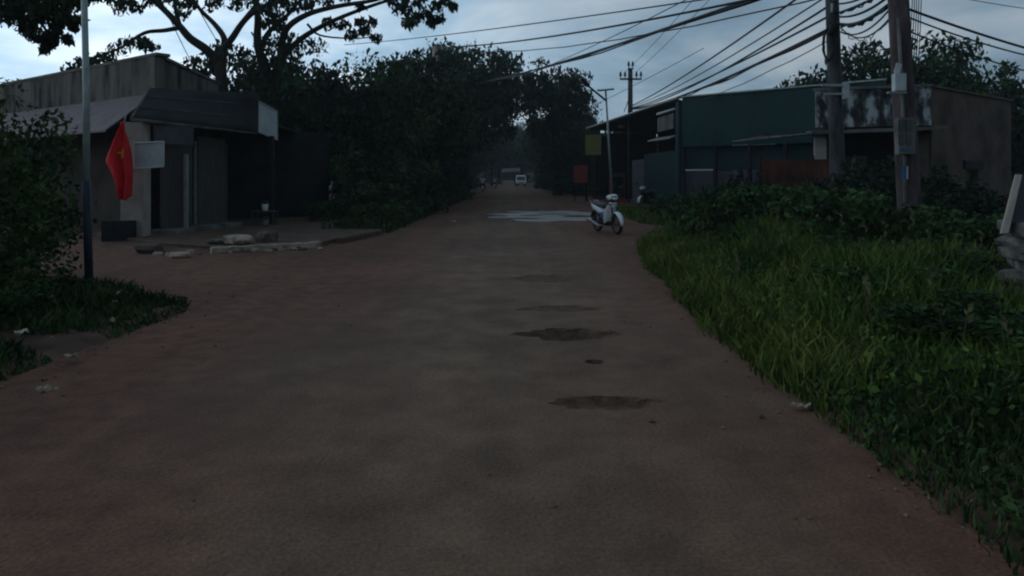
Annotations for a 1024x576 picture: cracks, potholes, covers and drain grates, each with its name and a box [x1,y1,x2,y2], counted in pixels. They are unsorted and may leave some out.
pothole [511,274,585,283]
pothole [547,395,664,410]
pothole [509,328,623,341]
